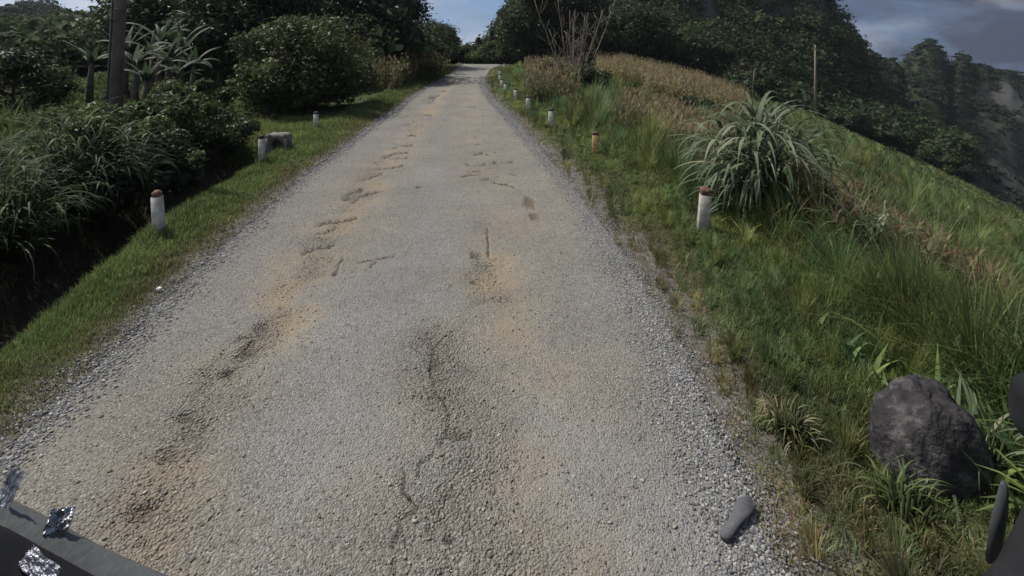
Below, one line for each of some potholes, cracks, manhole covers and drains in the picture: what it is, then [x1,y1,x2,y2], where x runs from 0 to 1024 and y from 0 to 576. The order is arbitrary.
pothole [253,321,274,334]
pothole [234,341,263,362]
pothole [150,446,186,464]
pothole [125,501,168,522]
crack [305,83,449,275]
pothole [174,412,198,422]
crack [462,144,515,188]
crack [390,337,451,547]
